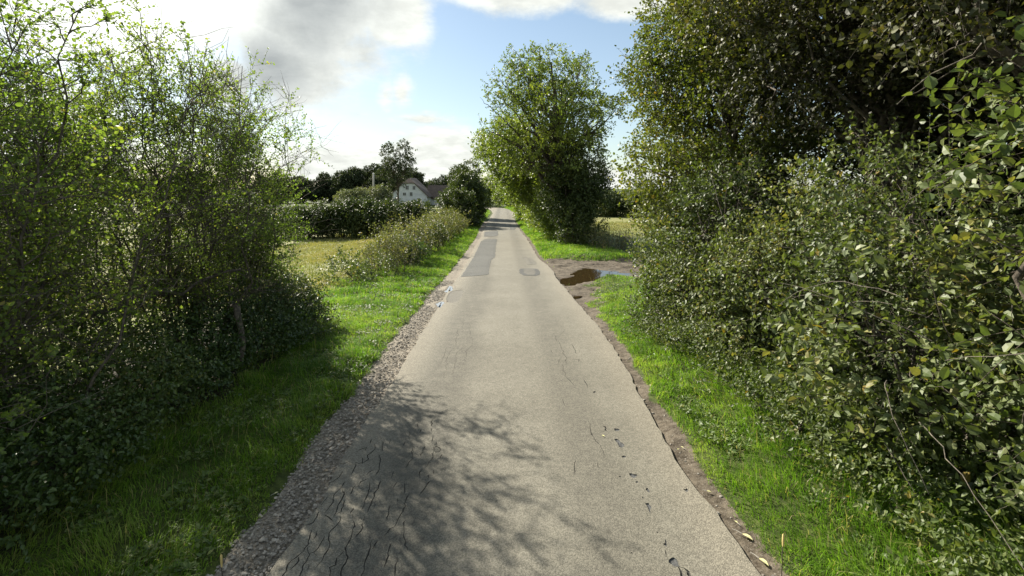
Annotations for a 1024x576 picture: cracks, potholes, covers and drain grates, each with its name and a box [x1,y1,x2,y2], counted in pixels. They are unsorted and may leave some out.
crack [282,420,442,576]
